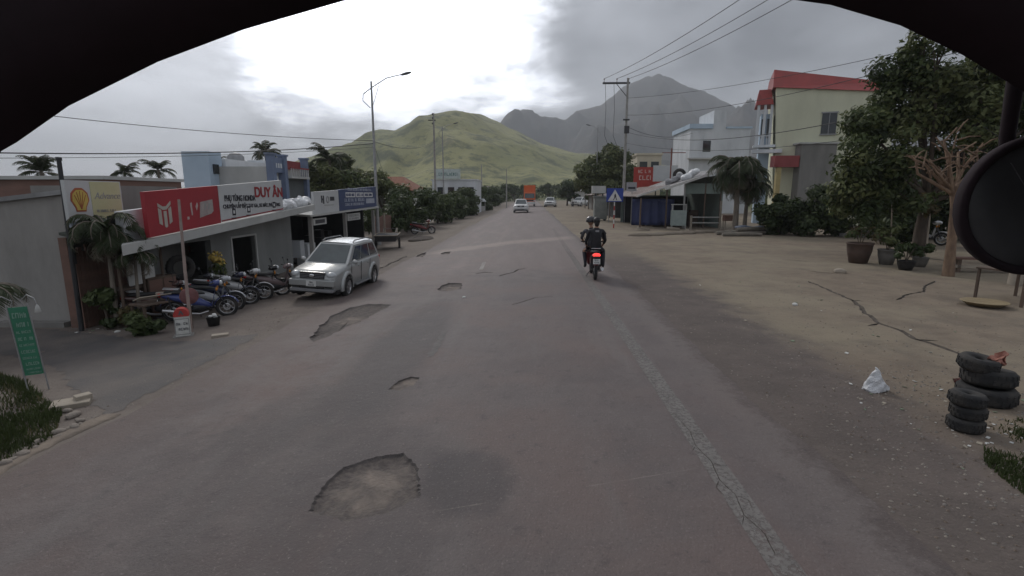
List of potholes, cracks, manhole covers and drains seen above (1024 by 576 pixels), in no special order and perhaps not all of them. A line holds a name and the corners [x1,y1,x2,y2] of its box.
pothole [390,377,419,391]
pothole [437,283,463,291]
crack [794,260,959,354]
pothole [309,452,422,522]
pothole [309,304,390,342]
